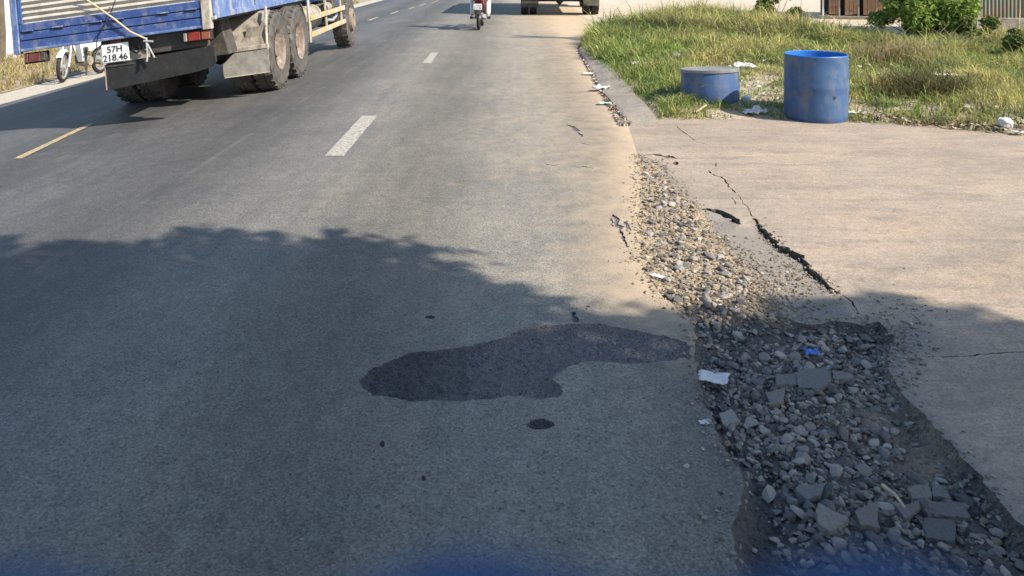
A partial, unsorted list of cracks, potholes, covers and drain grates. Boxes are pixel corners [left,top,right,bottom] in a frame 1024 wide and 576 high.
crack [701,163,858,312]
pothole [634,155,1024,576]
crack [610,215,631,247]
crack [646,127,708,159]
